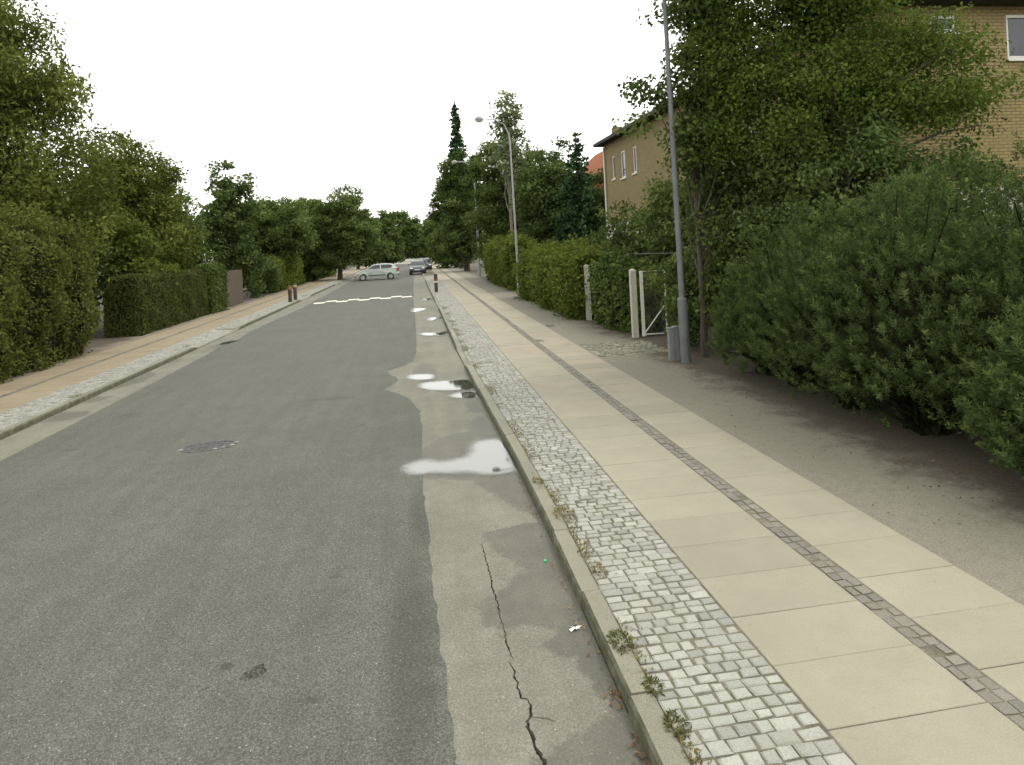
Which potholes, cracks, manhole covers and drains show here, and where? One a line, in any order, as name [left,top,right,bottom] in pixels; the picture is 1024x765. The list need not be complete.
pothole [240,663,267,681]
manhole cover [178,440,238,453]
crack [481,544,555,765]
